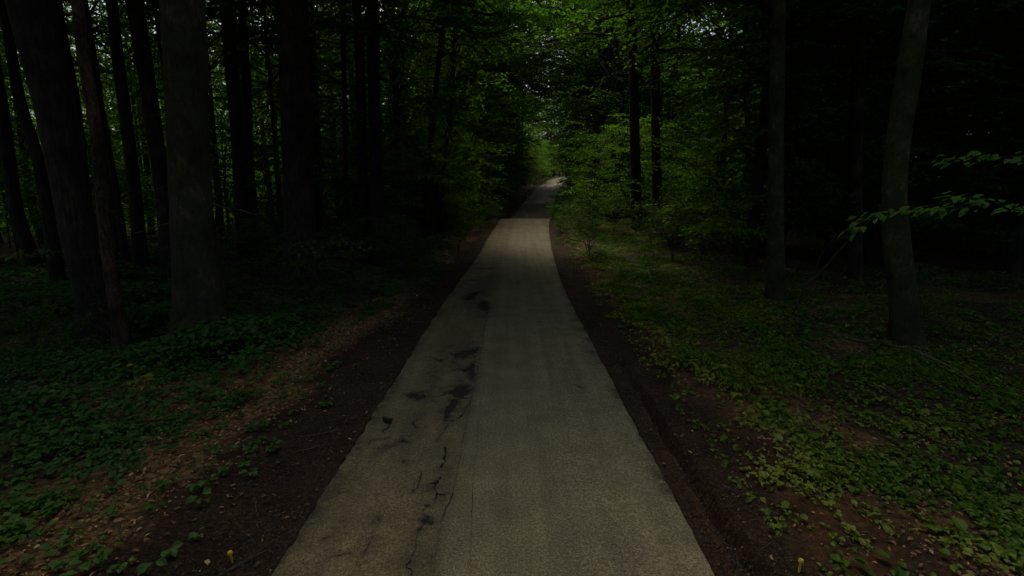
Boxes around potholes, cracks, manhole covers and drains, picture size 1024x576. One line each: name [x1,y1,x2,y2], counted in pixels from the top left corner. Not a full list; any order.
crack [406,393,480,576]
